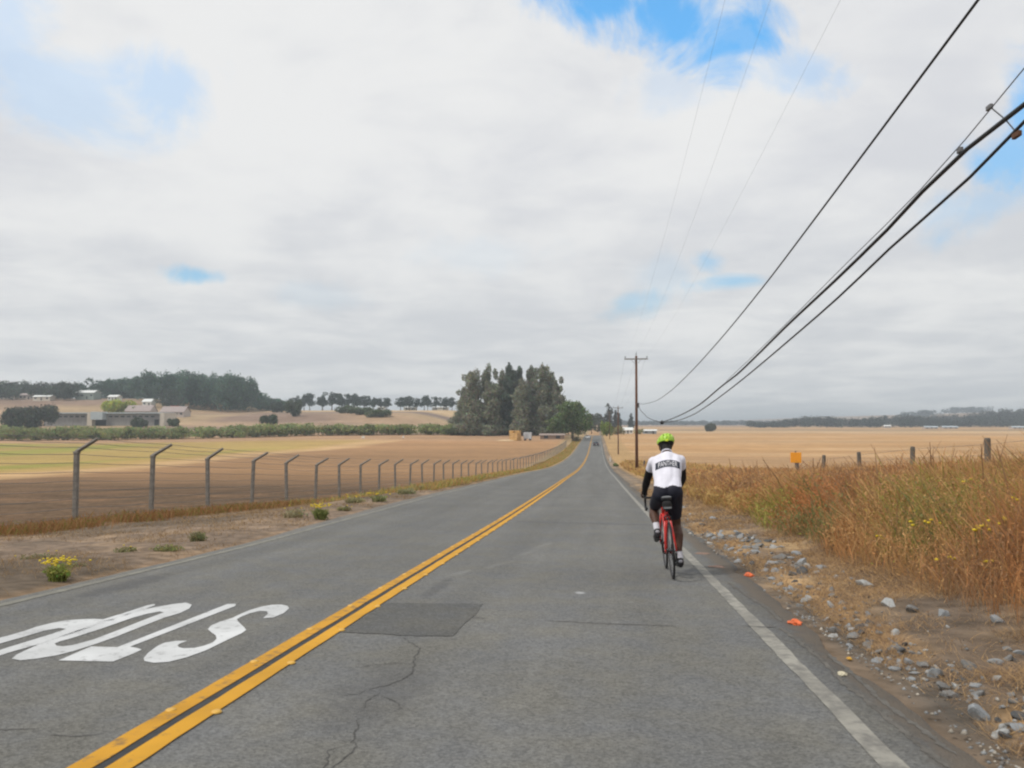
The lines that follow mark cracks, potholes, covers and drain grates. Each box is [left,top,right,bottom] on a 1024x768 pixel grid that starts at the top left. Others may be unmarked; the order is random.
crack [323,638,421,768]
crack [0,728,106,737]
